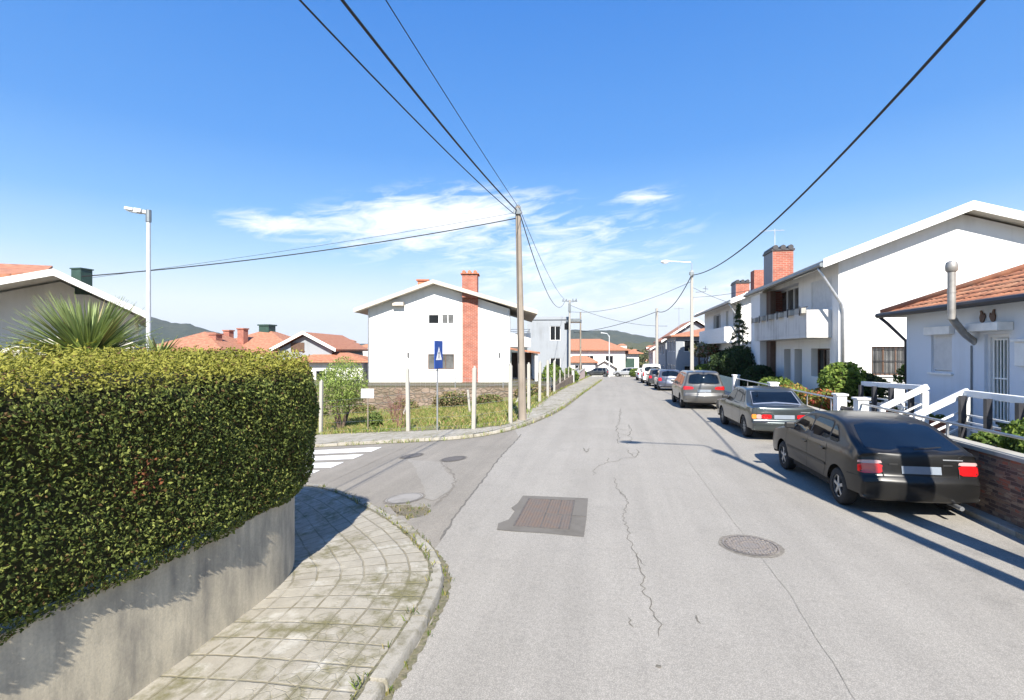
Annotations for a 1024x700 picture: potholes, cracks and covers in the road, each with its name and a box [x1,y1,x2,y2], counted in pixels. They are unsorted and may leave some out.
manhole cover [718,535,785,558]
crack [583,411,662,635]
manhole cover [497,495,588,537]
manhole cover [383,492,426,504]
